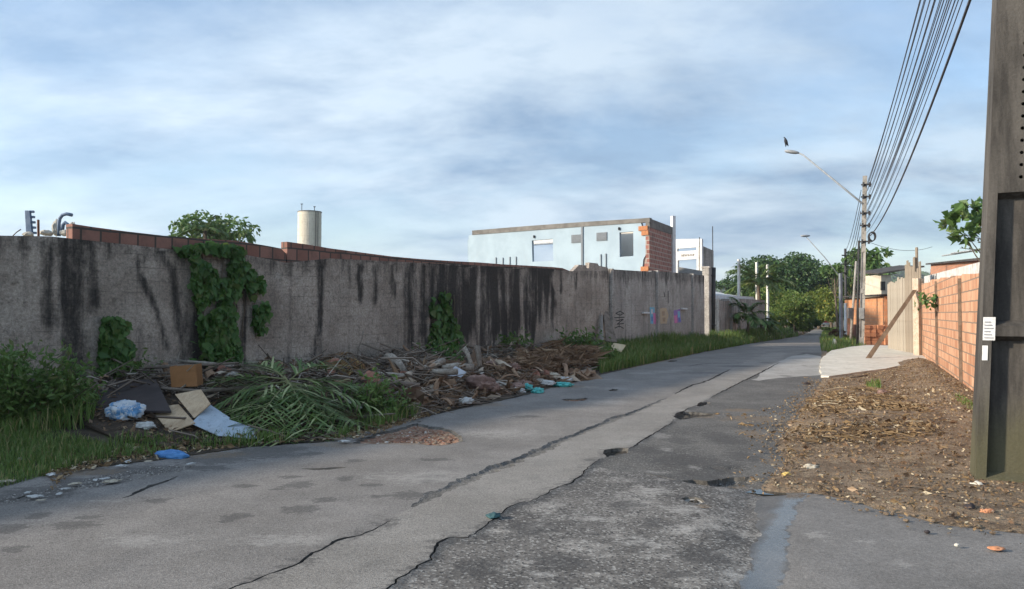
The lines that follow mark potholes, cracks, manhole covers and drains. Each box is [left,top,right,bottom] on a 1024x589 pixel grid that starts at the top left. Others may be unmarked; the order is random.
pothole [683,477,763,487]
pothole [674,411,715,420]
pothole [603,448,628,457]
crack [229,363,778,589]
